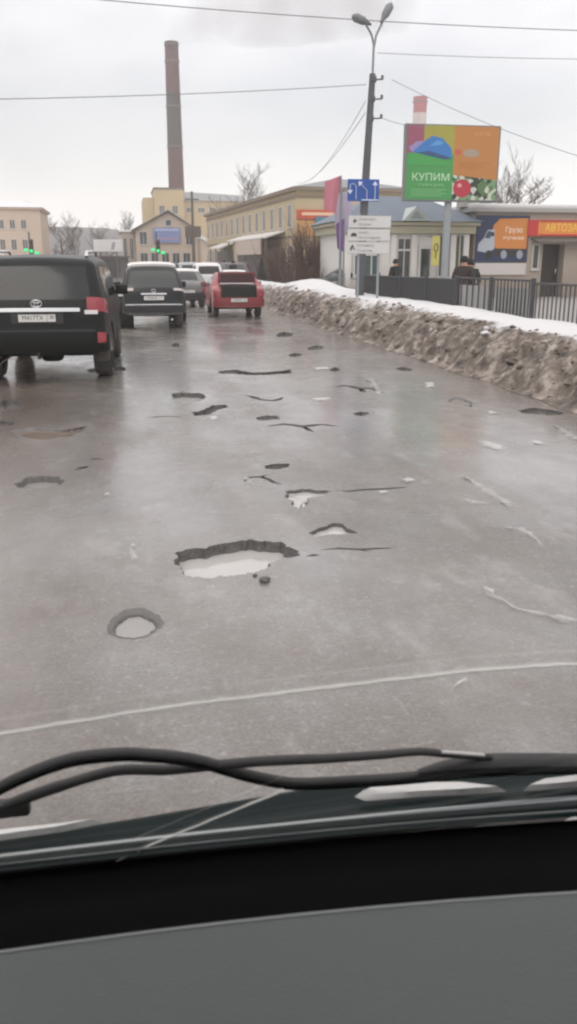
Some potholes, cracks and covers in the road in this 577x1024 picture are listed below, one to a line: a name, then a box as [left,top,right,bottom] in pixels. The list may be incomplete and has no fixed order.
pothole [518,408,563,416]
pothole [171,393,206,403]
pothole [191,404,227,416]
pothole [284,489,331,509]
pothole [13,476,65,488]
pothole [107,608,165,640]
pothole [309,523,357,537]
pothole [173,539,300,578]
crack [270,423,333,432]
crack [244,474,280,484]
